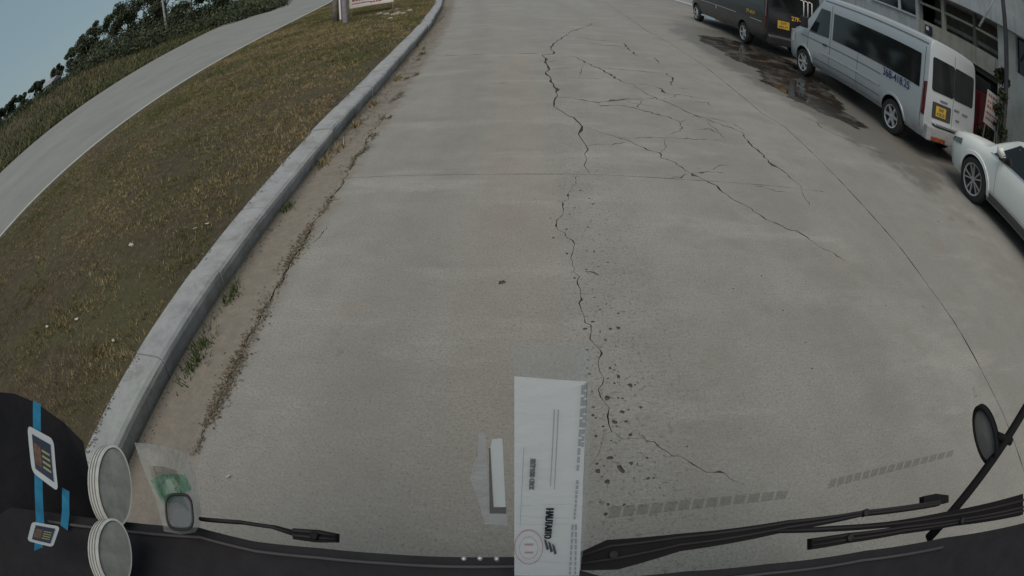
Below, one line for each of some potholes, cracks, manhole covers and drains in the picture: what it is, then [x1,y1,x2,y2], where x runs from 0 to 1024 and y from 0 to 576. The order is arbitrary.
crack [555,174,739,483]
crack [542,23,845,261]
crack [200,114,388,444]
